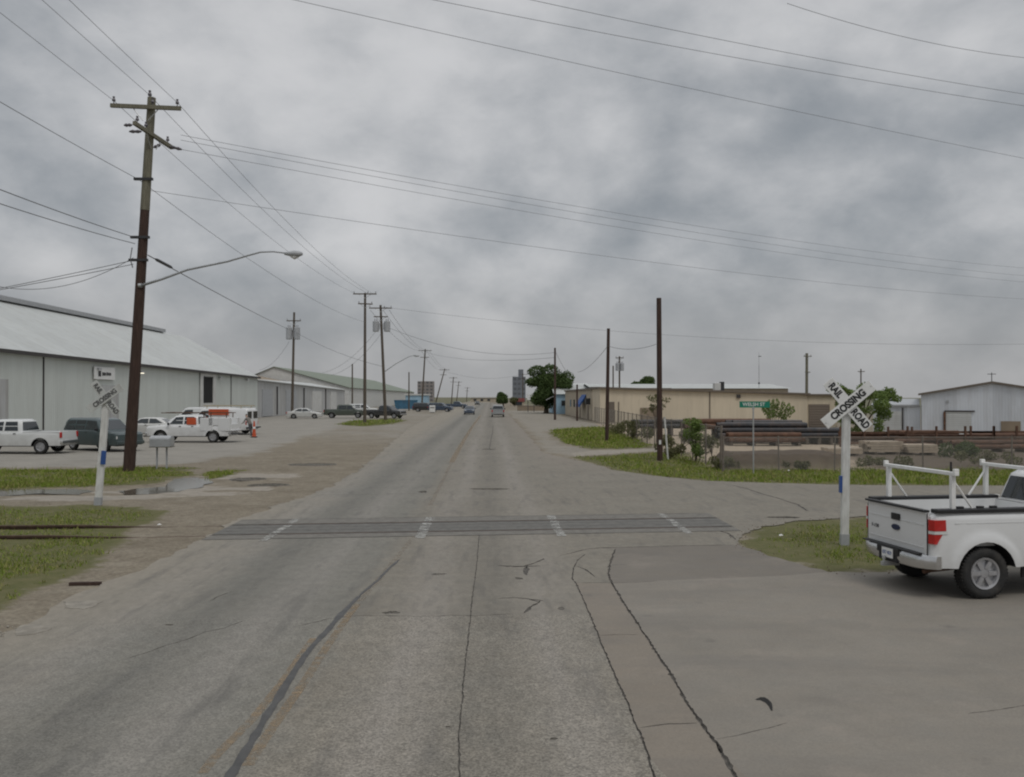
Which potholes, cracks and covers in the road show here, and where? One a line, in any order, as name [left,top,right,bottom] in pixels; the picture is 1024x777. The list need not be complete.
crack [304,535,542,777]
